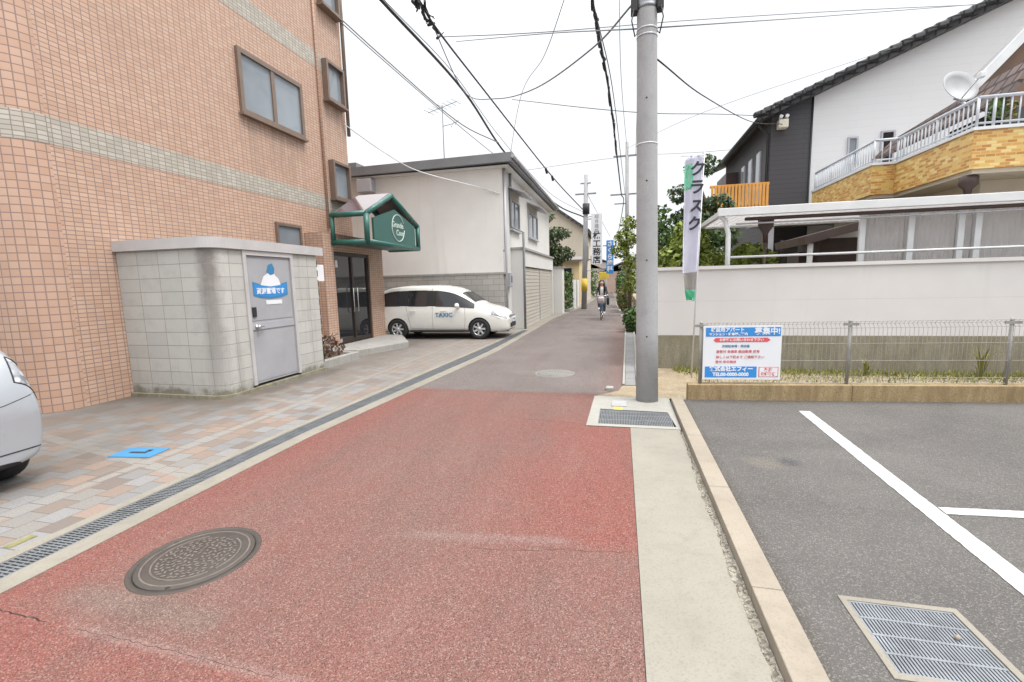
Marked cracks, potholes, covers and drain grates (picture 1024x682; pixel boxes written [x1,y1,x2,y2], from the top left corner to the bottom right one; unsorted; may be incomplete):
drain grate [598,409,676,430]
drain grate [837,595,1024,682]
crack [0,608,49,623]
manhole cover [124,527,262,596]
crack [64,626,281,680]
manhole cover [535,369,575,377]
